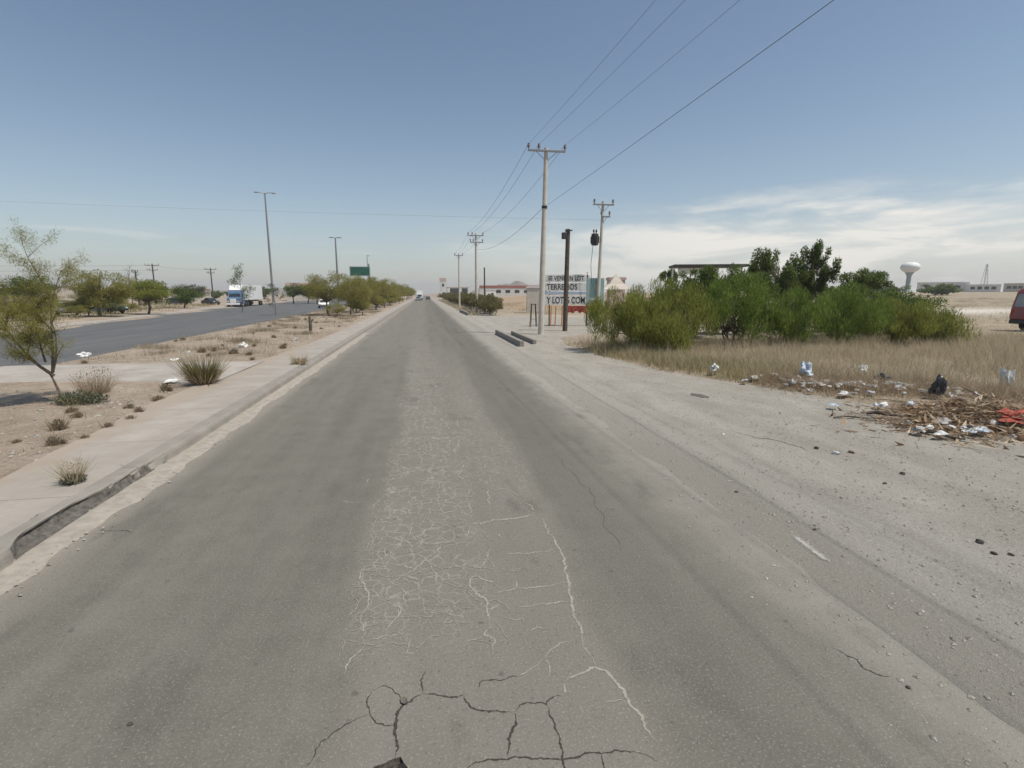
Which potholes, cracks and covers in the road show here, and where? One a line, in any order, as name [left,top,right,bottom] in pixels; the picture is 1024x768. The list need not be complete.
crack [305,363,659,768]
pothole [373,757,408,768]
